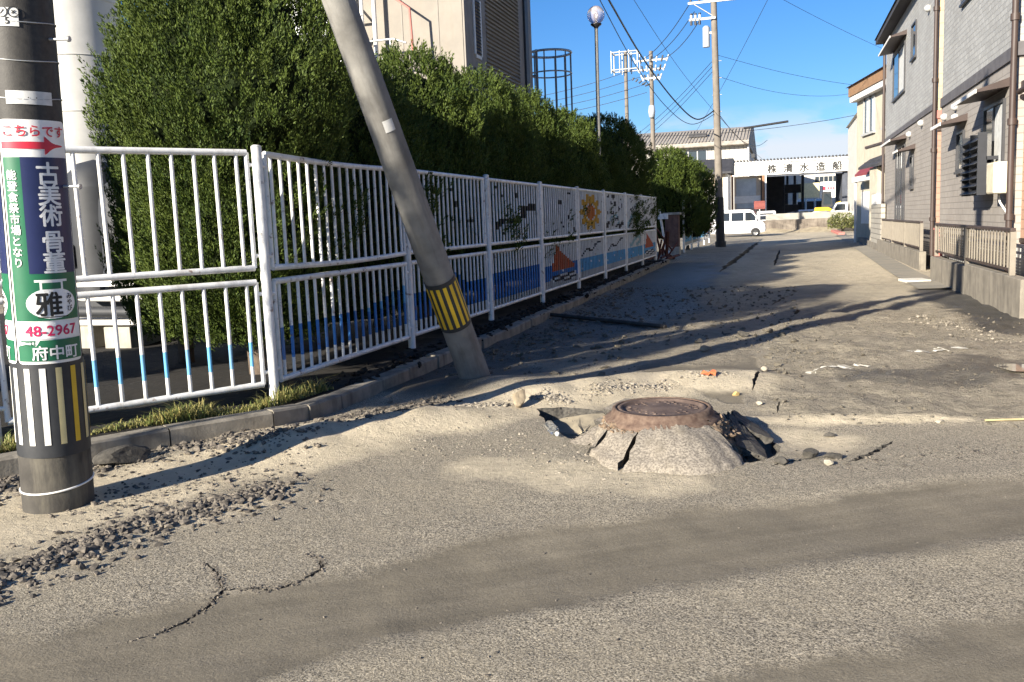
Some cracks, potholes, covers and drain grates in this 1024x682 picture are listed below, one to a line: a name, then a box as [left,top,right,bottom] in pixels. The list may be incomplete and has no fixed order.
crack [772,441,925,470]
crack [720,242,780,272]
pothole [537,407,605,439]
manhole cover [587,397,744,475]
crack [752,370,780,412]
crack [124,554,325,643]
